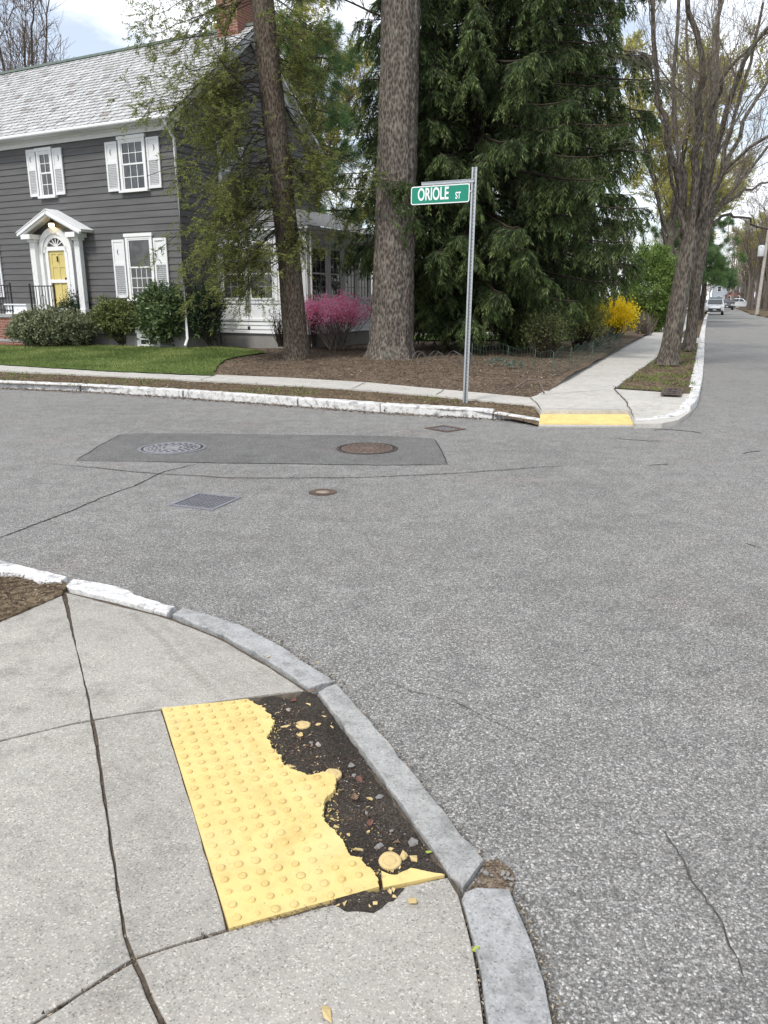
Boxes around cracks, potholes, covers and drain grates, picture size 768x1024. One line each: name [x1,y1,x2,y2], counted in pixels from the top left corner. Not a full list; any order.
utility cover [308,488,337,496]
manhole cover [336,442,398,455]
utility cover [168,493,241,511]
crack [386,682,547,744]
crack [662,826,751,988]
manhole cover [137,442,207,455]
